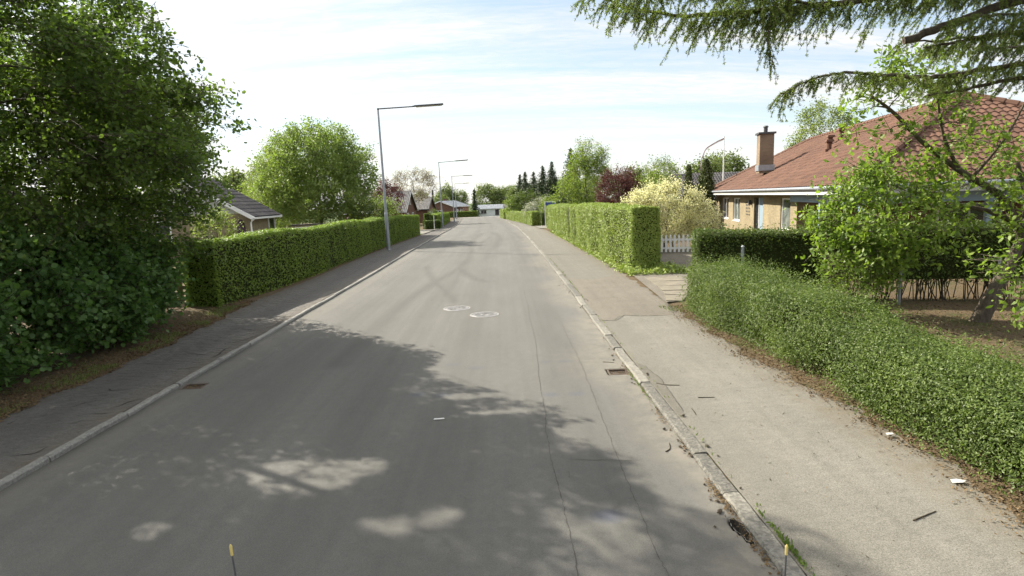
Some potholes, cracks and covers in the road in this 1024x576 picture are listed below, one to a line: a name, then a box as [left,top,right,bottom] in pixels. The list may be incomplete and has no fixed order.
crack [186,316,280,369]
